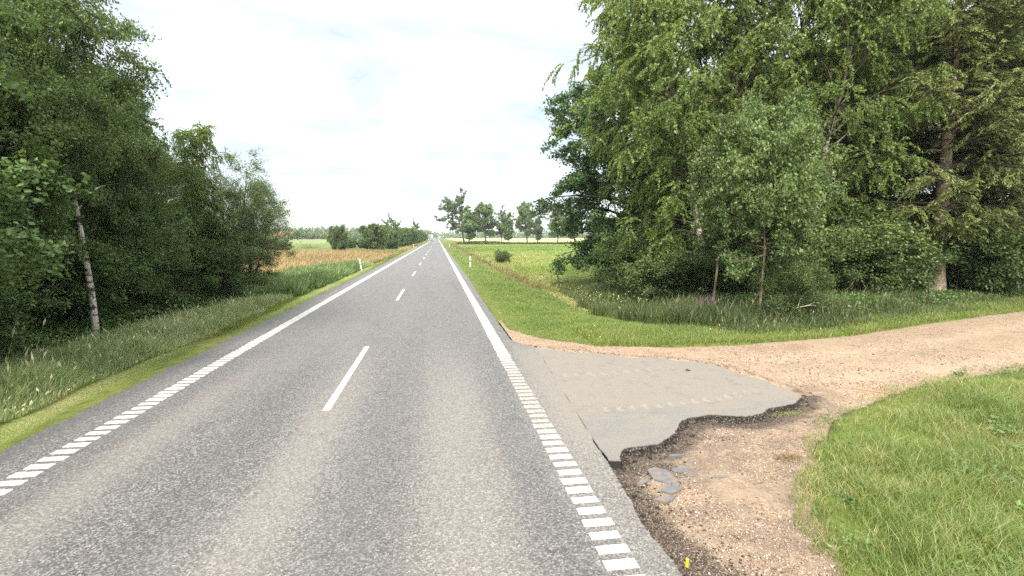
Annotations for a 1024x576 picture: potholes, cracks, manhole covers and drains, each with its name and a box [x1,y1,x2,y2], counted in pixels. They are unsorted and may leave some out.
pothole [608,395,851,576]
